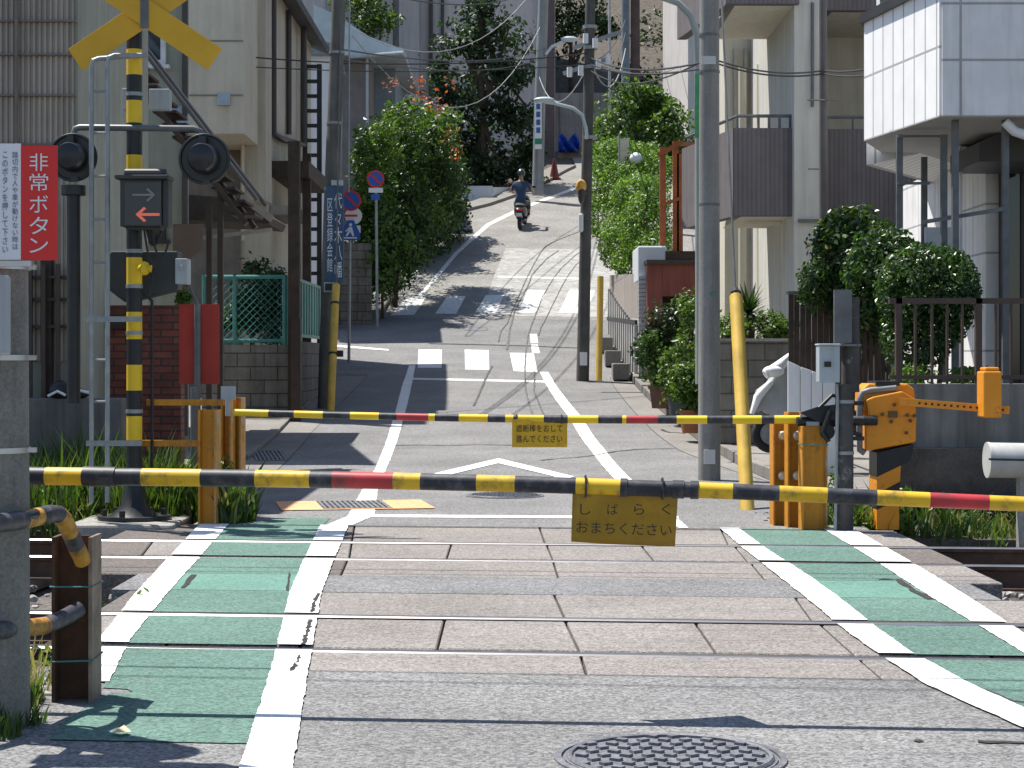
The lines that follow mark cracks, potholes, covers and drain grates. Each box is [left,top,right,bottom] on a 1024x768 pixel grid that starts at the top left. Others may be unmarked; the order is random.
manhole cover [554,733,788,768]
crack [428,232,579,415]
